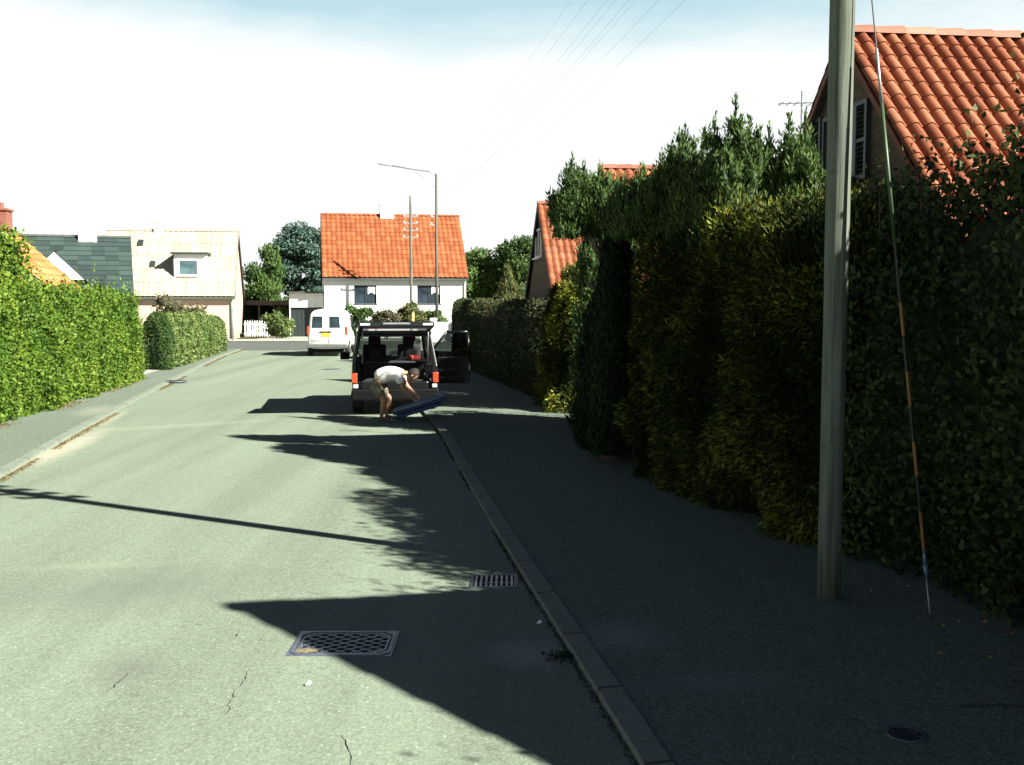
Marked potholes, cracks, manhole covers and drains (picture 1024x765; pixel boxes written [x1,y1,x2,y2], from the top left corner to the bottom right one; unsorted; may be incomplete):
manhole cover [886,726,927,743]
drain grate [469,574,518,587]
crack [175,669,314,753]
